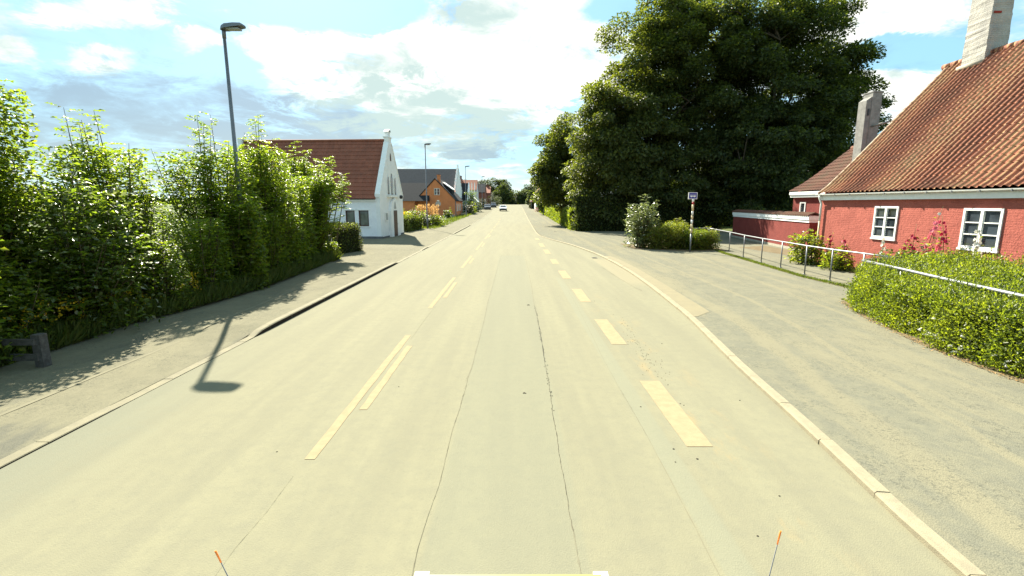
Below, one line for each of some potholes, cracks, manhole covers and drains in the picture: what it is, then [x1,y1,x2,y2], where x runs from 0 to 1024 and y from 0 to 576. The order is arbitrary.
crack [412,376,469,575]
crack [534,305,581,574]
